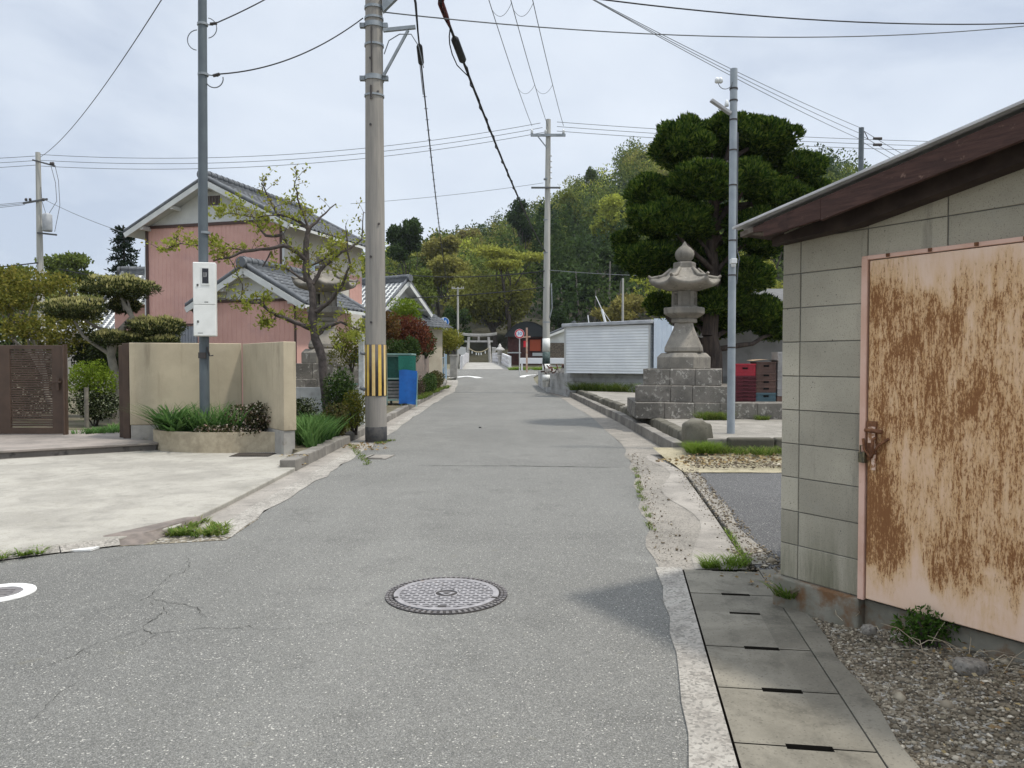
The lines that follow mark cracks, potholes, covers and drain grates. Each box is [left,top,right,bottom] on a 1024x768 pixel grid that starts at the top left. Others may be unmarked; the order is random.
manhole cover [385,576,507,615]
crack [26,556,353,722]
